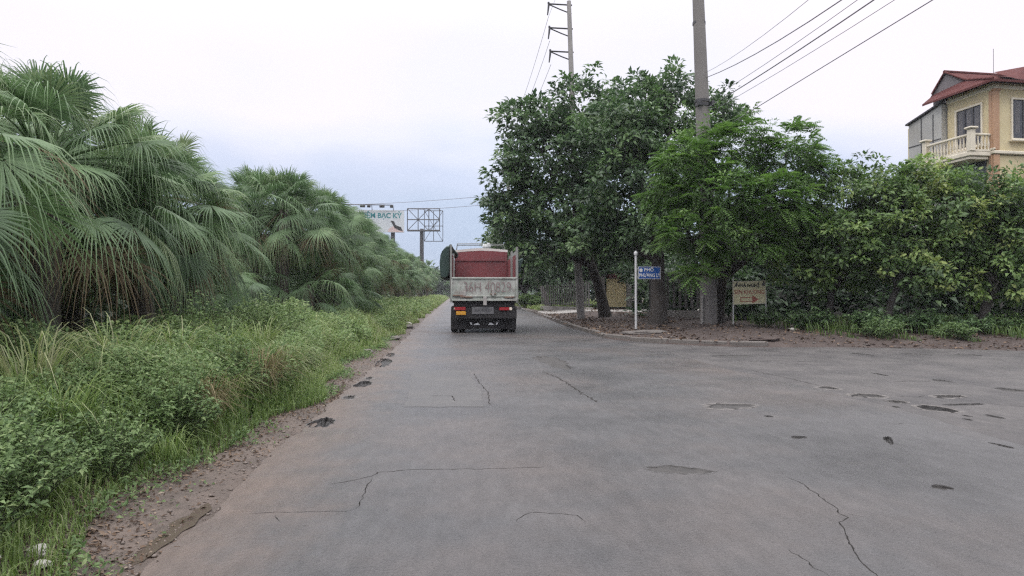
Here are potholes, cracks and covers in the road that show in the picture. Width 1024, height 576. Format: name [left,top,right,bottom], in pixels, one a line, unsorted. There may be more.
crack [544,372,597,402]
crack [263,467,532,521]
pothole [306,417,336,428]
pothole [911,404,966,413]
crack [792,479,878,576]
